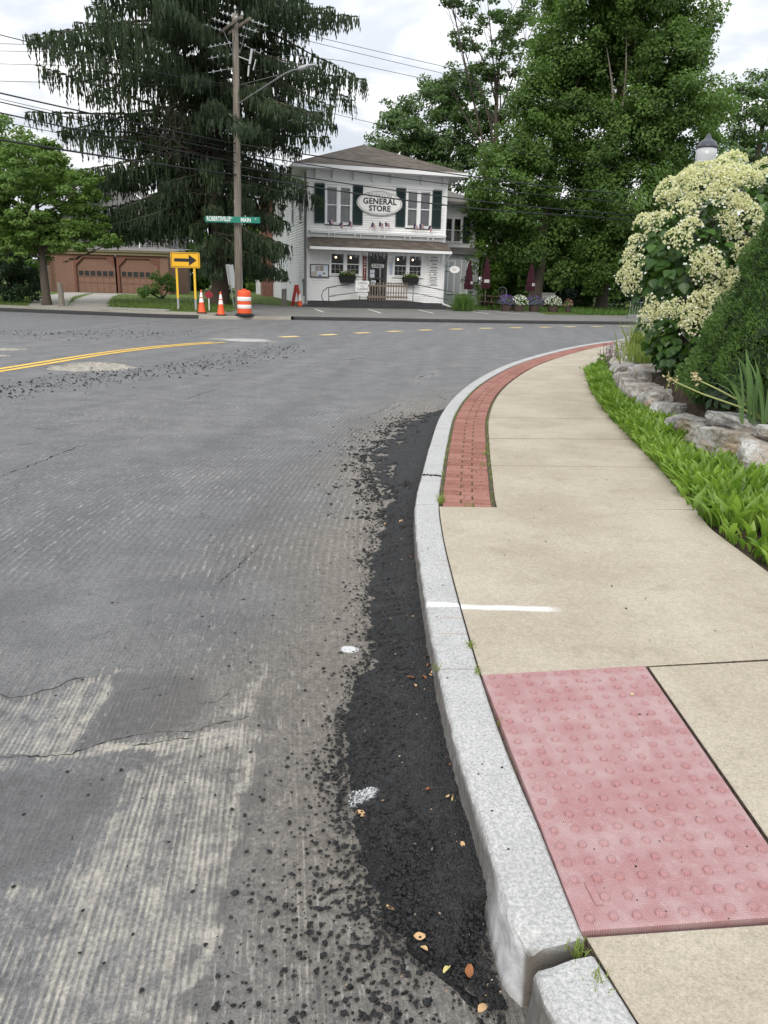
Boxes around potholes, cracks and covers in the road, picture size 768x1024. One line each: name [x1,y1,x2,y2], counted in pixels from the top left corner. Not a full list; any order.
crack [0,677,88,699]
crack [0,716,251,758]
